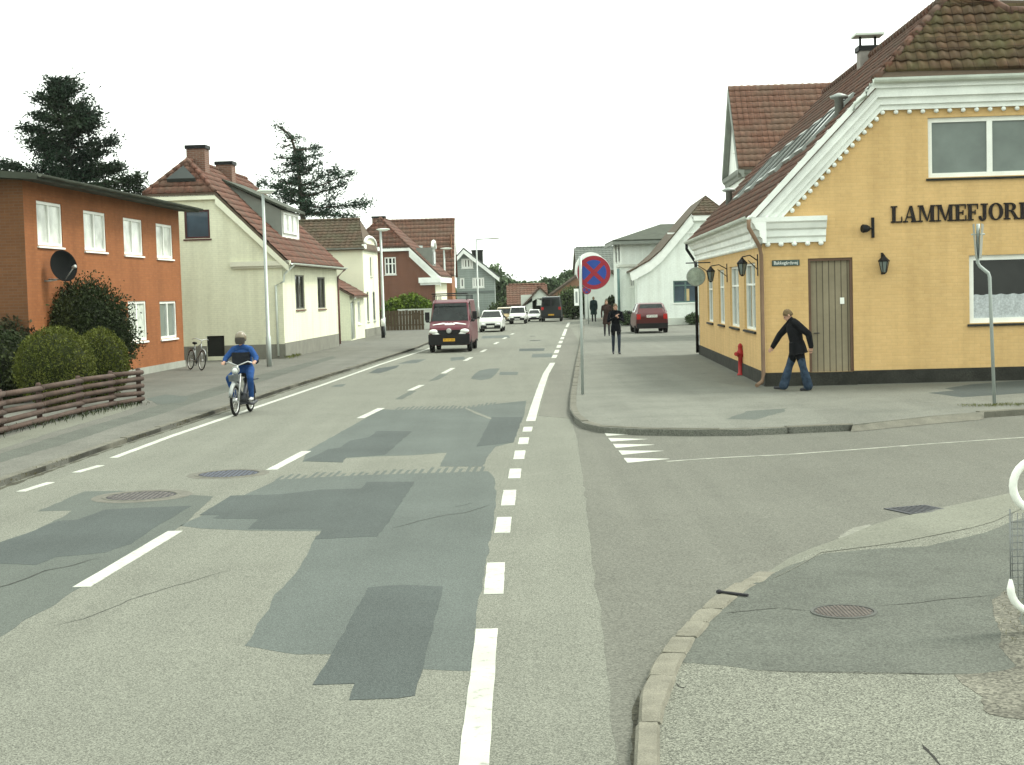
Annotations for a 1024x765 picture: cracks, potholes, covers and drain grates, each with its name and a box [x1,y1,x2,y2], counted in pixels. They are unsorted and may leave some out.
manhole cover [810,604,878,619]
manhole cover [91,489,192,503]
manhole cover [186,469,269,479]
drain grate [884,505,944,514]
crack [55,571,224,626]
